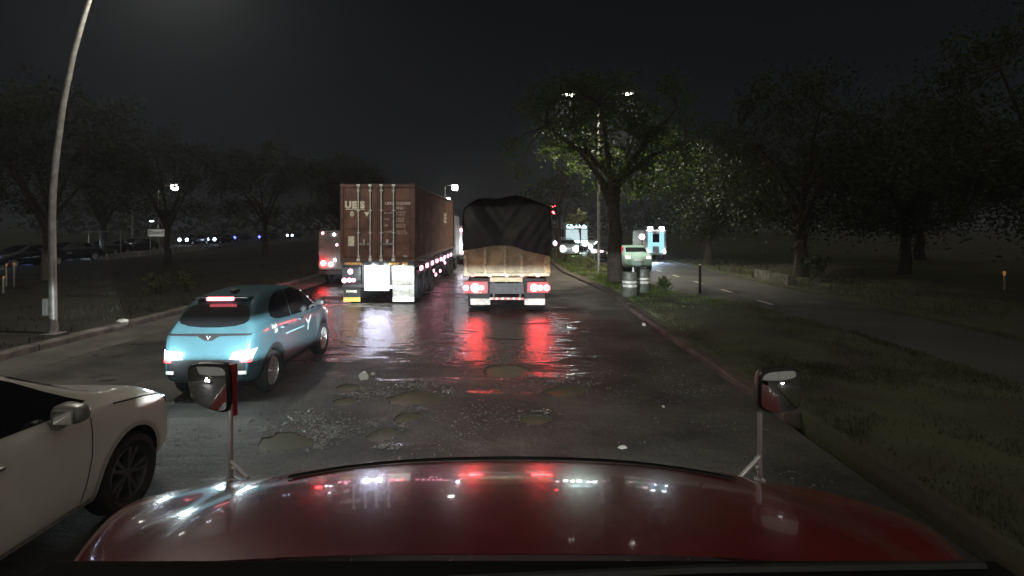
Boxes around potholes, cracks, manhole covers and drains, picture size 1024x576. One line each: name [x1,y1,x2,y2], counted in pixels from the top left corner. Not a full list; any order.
pothole [531,378,601,398]
pothole [392,406,437,423]
pothole [360,414,412,452]
pothole [327,379,372,397]
pothole [326,390,377,406]
pothole [518,405,561,425]
pothole [237,402,382,453]
pothole [473,357,538,379]
pothole [365,377,457,406]
